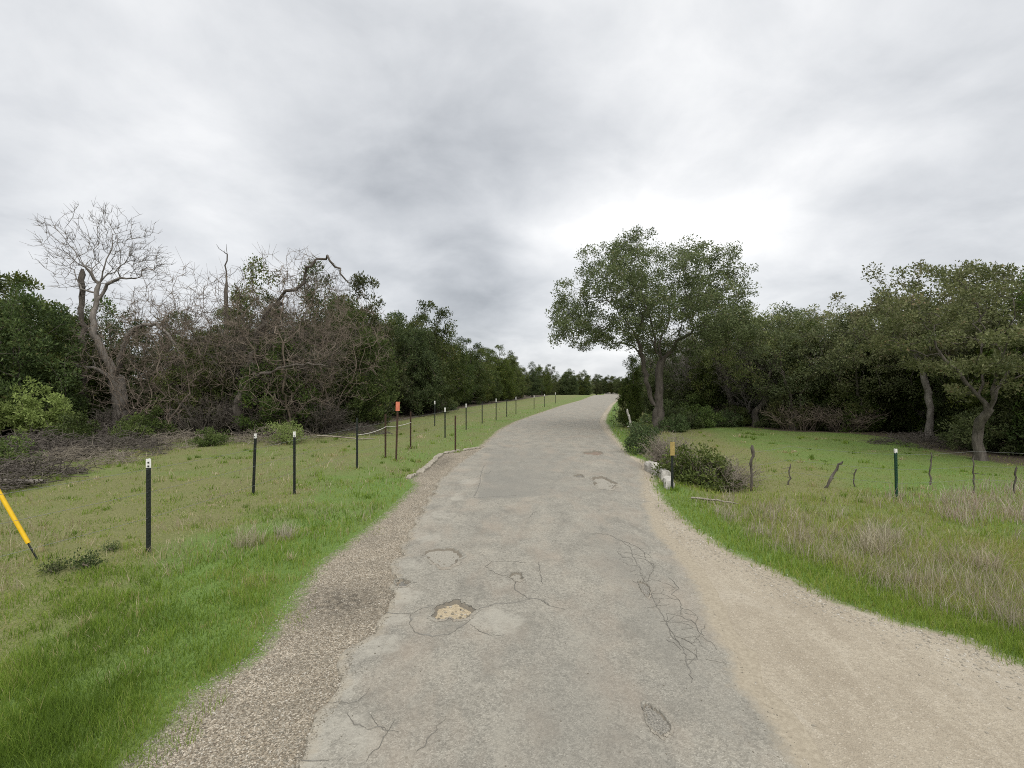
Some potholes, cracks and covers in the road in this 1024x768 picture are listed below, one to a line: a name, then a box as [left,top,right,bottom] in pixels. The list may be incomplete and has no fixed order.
crack [386,561,563,637]
pothole [641,700,674,740]
pothole [508,571,525,582]
crack [598,533,724,682]
crack [328,689,398,760]
pothole [426,597,481,622]
pothole [589,475,621,491]
